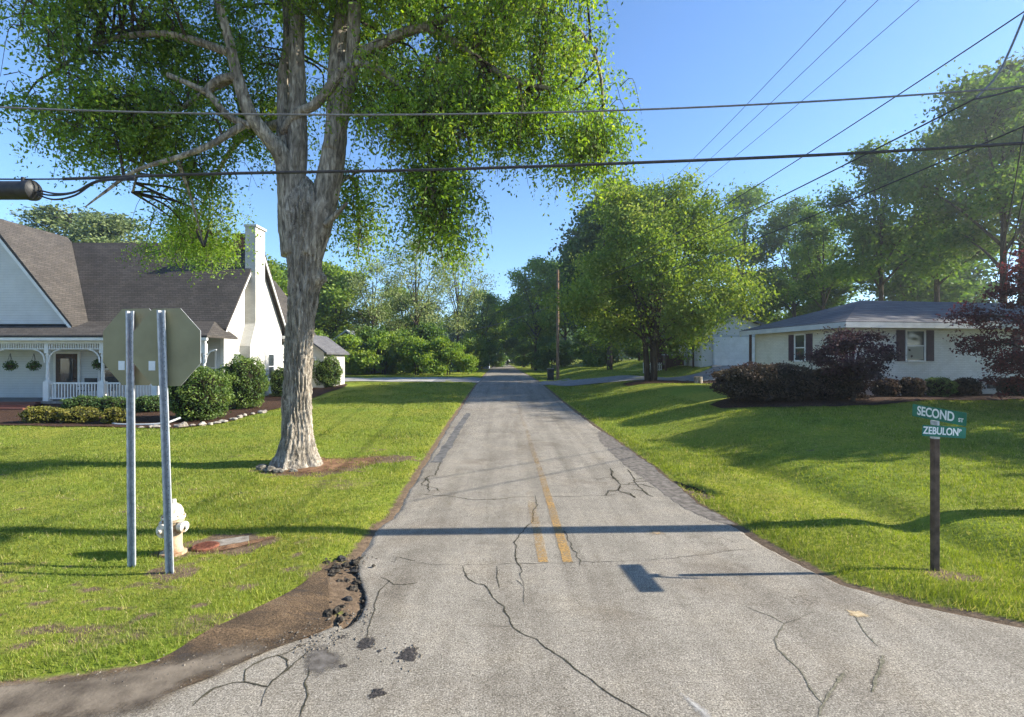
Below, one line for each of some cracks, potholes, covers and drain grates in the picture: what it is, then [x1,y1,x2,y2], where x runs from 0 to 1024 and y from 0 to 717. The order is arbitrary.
crack [367,463,741,715]
crack [195,643,310,716]
pothole [368,688,387,698]
crack [746,606,845,717]
crack [856,598,891,692]
pothole [322,555,375,626]
utility cover [191,535,249,552]
pothole [358,637,375,650]
pothole [396,647,419,661]
